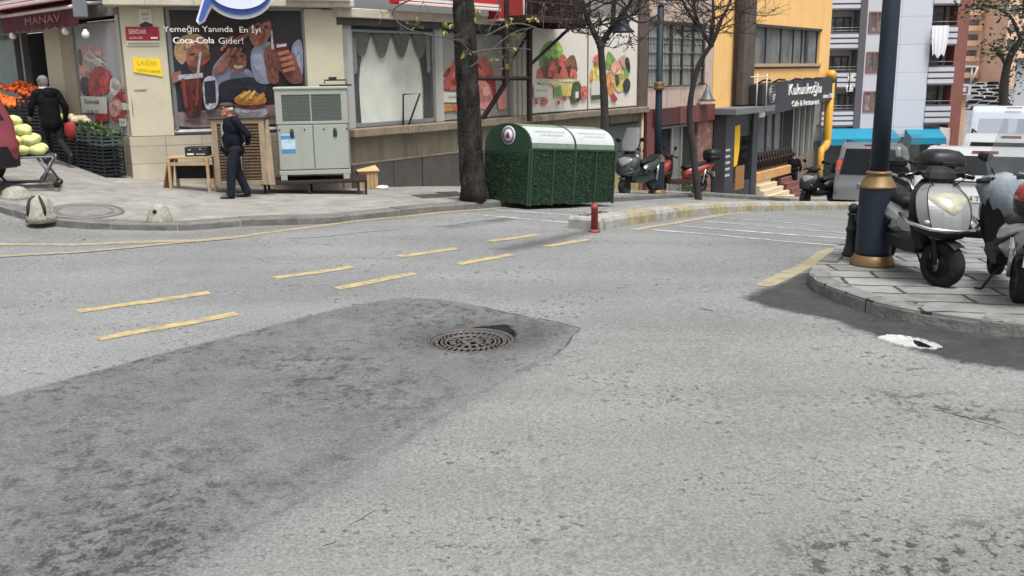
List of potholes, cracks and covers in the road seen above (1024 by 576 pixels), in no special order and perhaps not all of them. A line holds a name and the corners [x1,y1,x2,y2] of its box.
manhole cover [427,328,514,352]
manhole cover [54,203,125,219]
